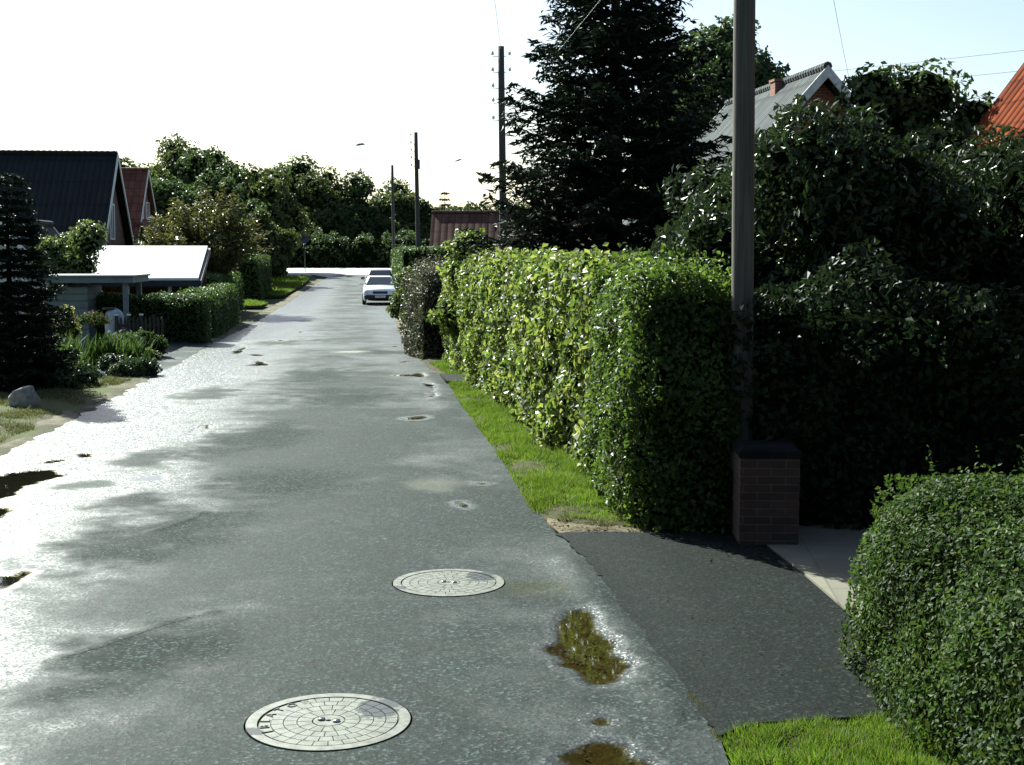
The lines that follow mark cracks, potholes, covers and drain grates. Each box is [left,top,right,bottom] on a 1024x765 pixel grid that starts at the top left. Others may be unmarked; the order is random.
manhole cover [245,693,411,752]
manhole cover [393,569,504,597]
